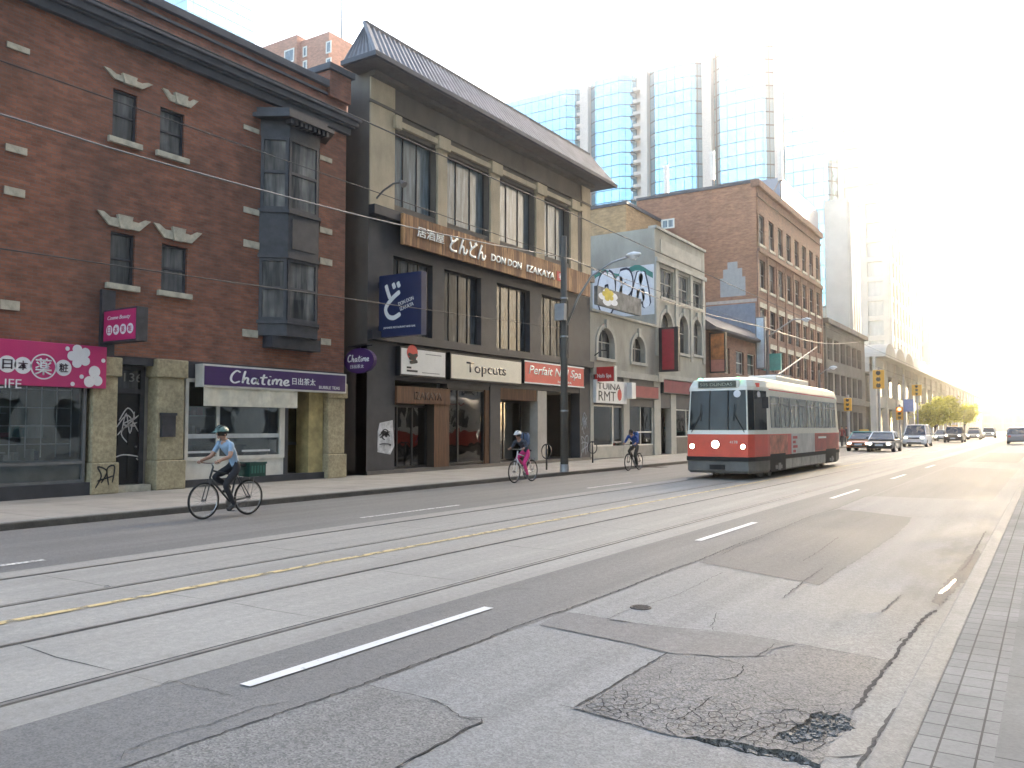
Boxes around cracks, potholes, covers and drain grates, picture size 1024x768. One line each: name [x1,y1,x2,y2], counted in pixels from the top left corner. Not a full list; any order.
crack [722,514,879,598]
pothole [773,711,856,744]
crack [959,531,986,571]
crack [120,680,289,761]
crack [540,595,937,768]
